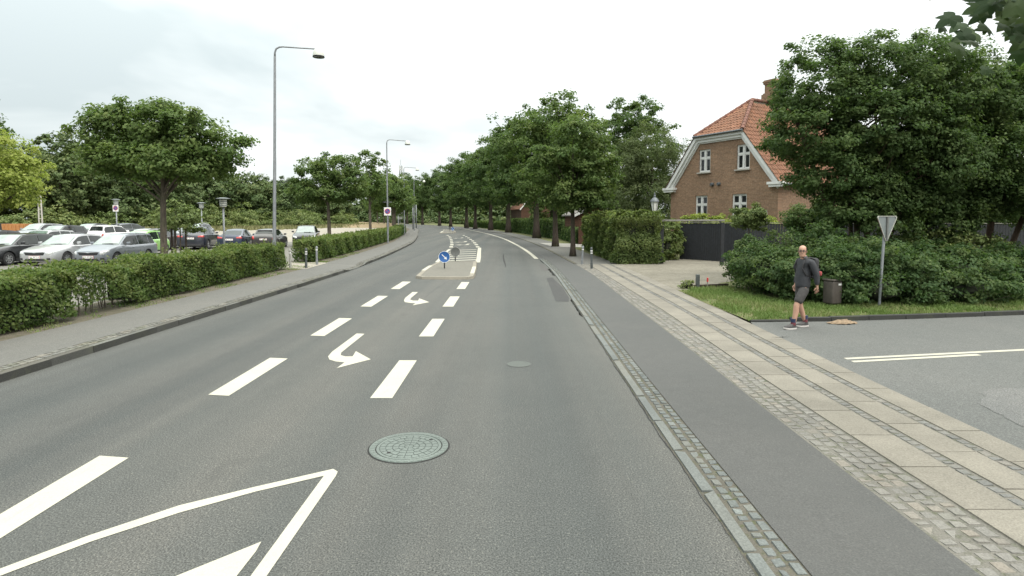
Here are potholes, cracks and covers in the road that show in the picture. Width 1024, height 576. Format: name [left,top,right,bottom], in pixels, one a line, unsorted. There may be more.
manhole cover [367,432,450,464]
